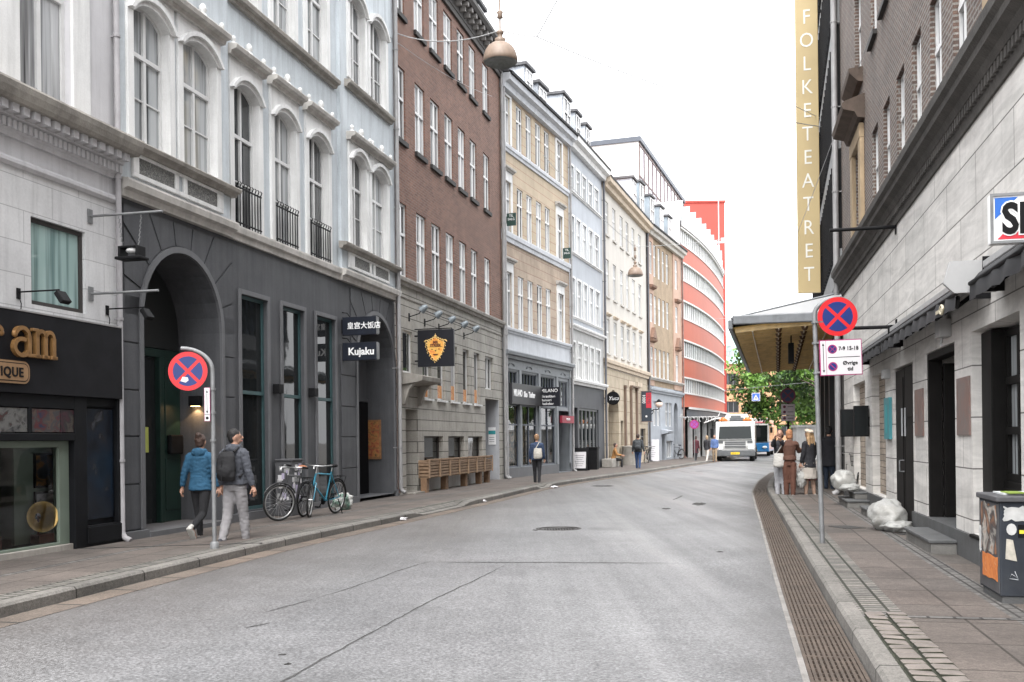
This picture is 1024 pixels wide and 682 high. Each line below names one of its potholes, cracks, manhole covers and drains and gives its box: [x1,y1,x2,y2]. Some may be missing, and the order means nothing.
drain grate [753,472,871,682]
